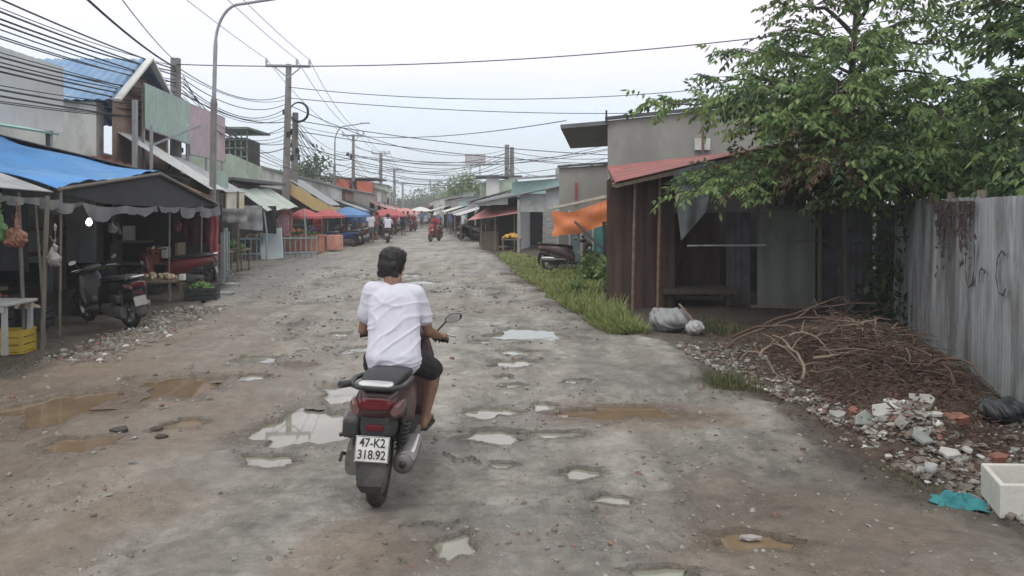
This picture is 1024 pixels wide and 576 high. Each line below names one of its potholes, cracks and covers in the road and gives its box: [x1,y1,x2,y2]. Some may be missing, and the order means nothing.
pothole [527,401,562,413]
pothole [485,460,524,469]
pothole [303,380,361,410]
pothole [428,528,482,563]
pothole [88,371,241,410]
pothole [211,372,275,383]
pothole [481,357,545,368]
pothole [149,416,216,431]
pothole [693,526,815,553]
pothole [32,432,129,456]
pothole [558,377,595,385]
pothole [529,403,699,422]
